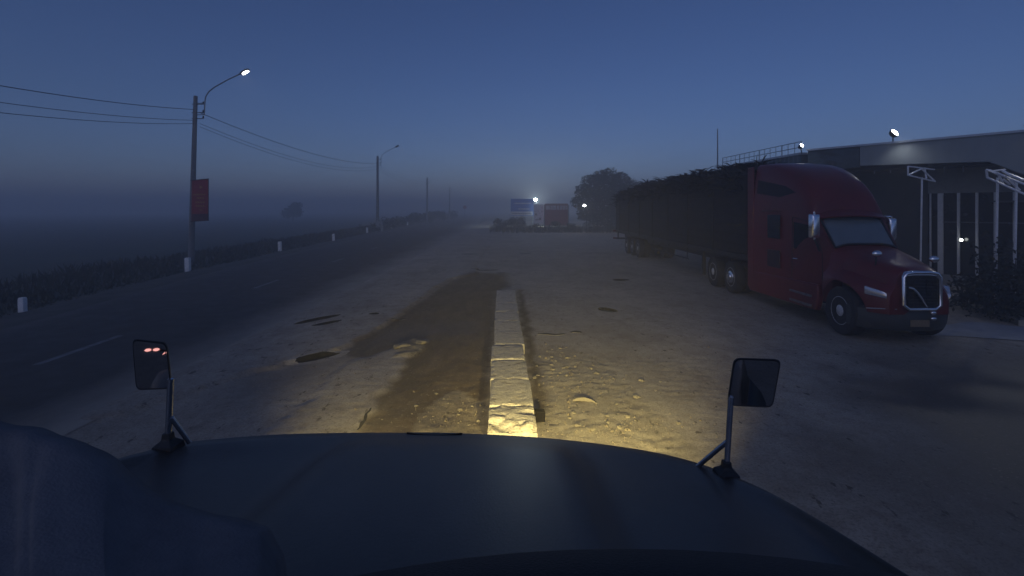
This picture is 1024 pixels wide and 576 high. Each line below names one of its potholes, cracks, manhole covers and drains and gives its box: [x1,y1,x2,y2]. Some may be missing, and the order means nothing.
crack [357,408,372,430]
pothole [286,313,348,326]
pothole [284,348,350,365]
pothole [591,306,625,314]
